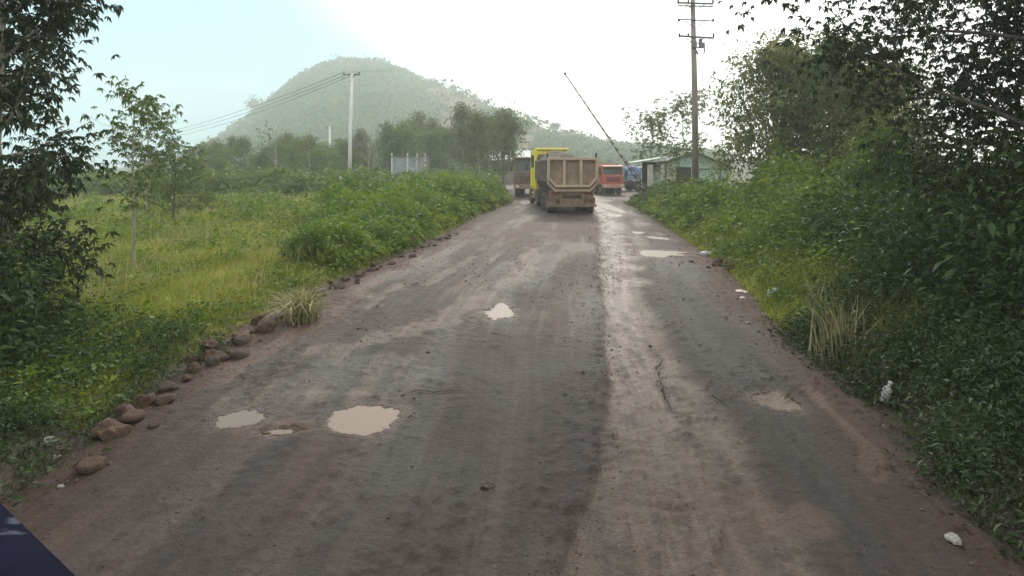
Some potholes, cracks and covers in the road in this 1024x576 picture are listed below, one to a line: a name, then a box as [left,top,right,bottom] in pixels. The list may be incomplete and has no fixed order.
pothole [629,249,694,258]
pothole [316,400,411,441]
pothole [204,407,274,432]
pothole [744,388,809,415]
crack [652,358,677,413]
pothole [257,427,304,436]
pothole [480,300,519,323]
